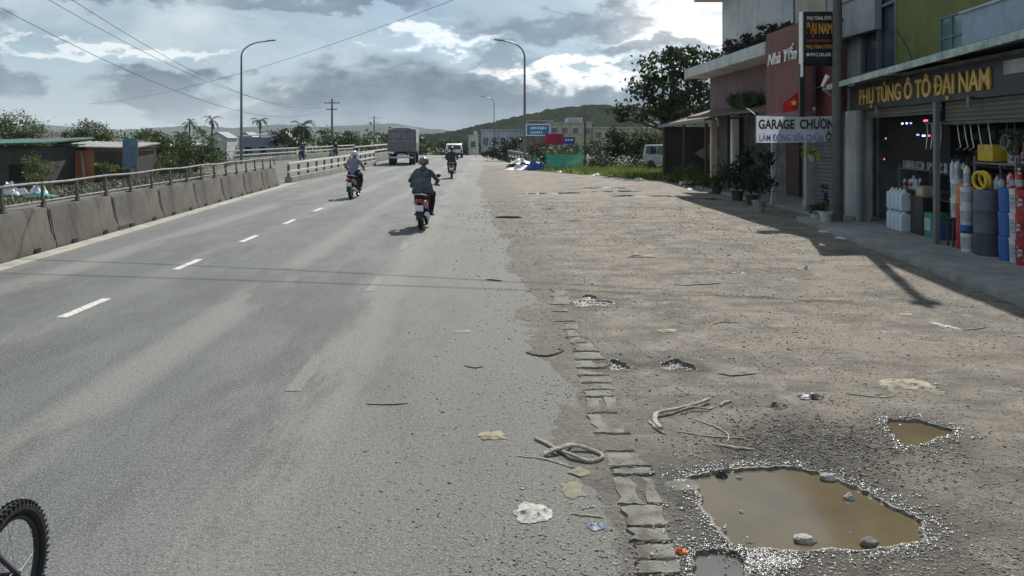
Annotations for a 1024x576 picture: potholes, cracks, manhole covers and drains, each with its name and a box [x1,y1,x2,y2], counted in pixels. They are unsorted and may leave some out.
pothole [570,294,617,307]
pothole [862,411,983,458]
pothole [607,358,633,371]
pothole [649,452,974,576]
pothole [657,357,698,370]
